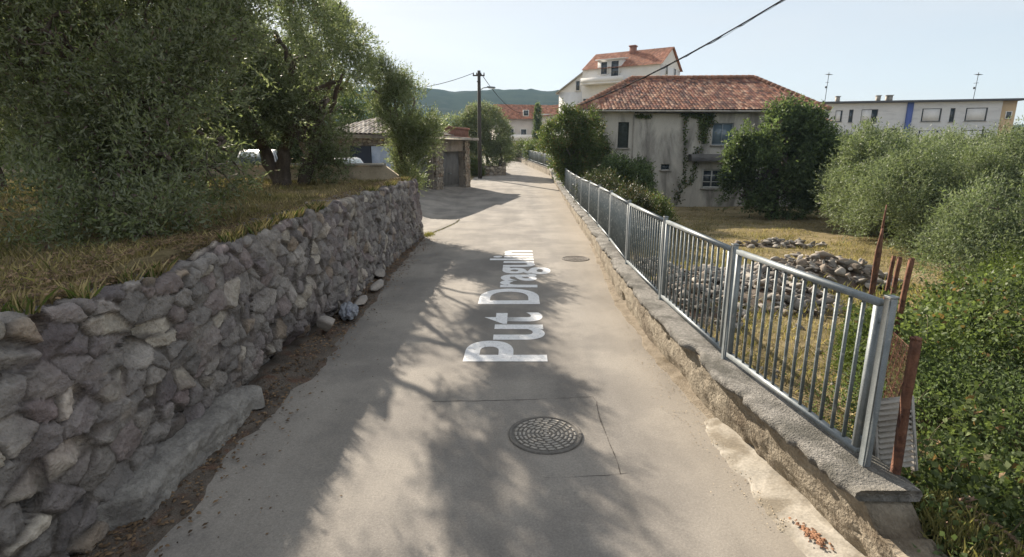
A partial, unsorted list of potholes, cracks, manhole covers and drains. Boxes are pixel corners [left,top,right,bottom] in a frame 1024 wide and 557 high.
manhole cover [509,416,582,455]
